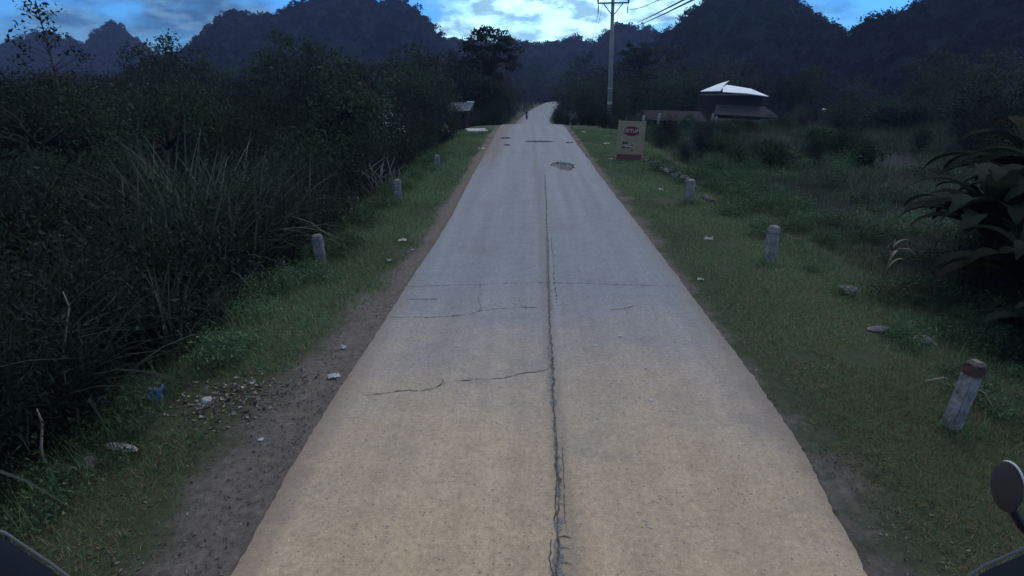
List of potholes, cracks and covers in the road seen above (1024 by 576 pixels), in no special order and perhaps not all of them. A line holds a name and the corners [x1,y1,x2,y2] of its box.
crack [398,282,665,318]
crack [371,367,552,395]
pothole [549,160,576,171]
